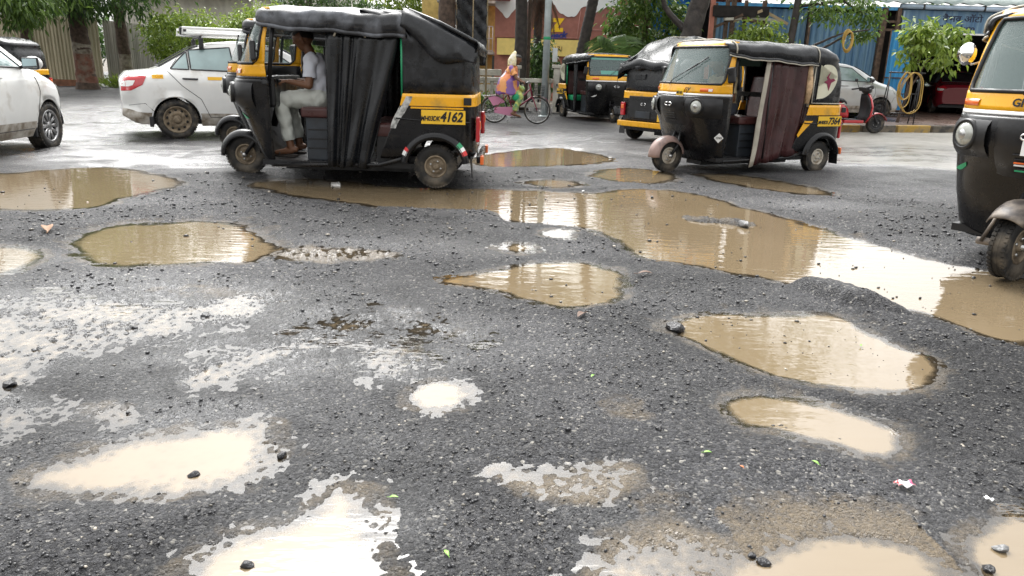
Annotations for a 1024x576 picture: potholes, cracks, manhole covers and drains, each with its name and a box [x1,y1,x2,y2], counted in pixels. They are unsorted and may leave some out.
pothole [466,145,623,167]
pothole [237,174,1024,348]
pothole [52,216,295,269]
pothole [120,466,446,576]
pothole [0,406,313,513]
pothole [637,303,967,400]
pothole [718,506,962,576]
pothole [380,368,493,423]
pothole [917,489,1024,576]
pothole [0,164,196,213]
pothole [0,238,63,277]
pothole [693,379,935,470]
